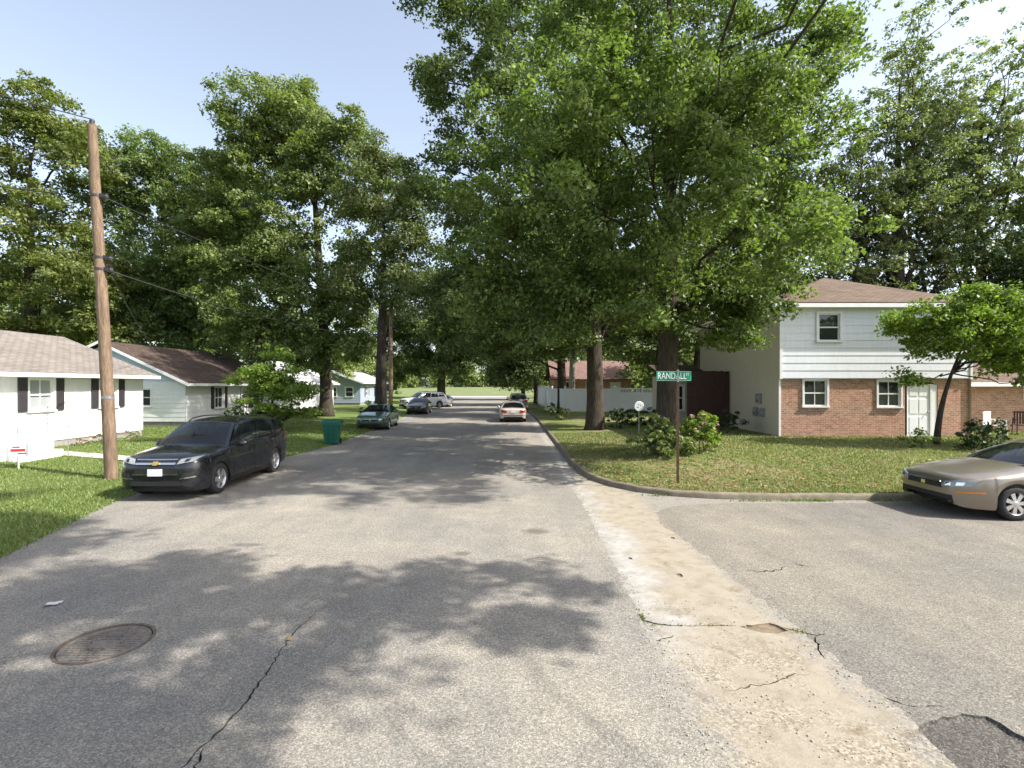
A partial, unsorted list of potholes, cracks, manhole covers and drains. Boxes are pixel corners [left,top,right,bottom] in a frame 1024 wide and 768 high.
crack [181,603,328,768]
manhole cover [50,623,157,665]
pothole [918,713,1024,768]
crack [737,673,809,690]
crack [641,616,825,657]
pothole [740,623,788,634]
